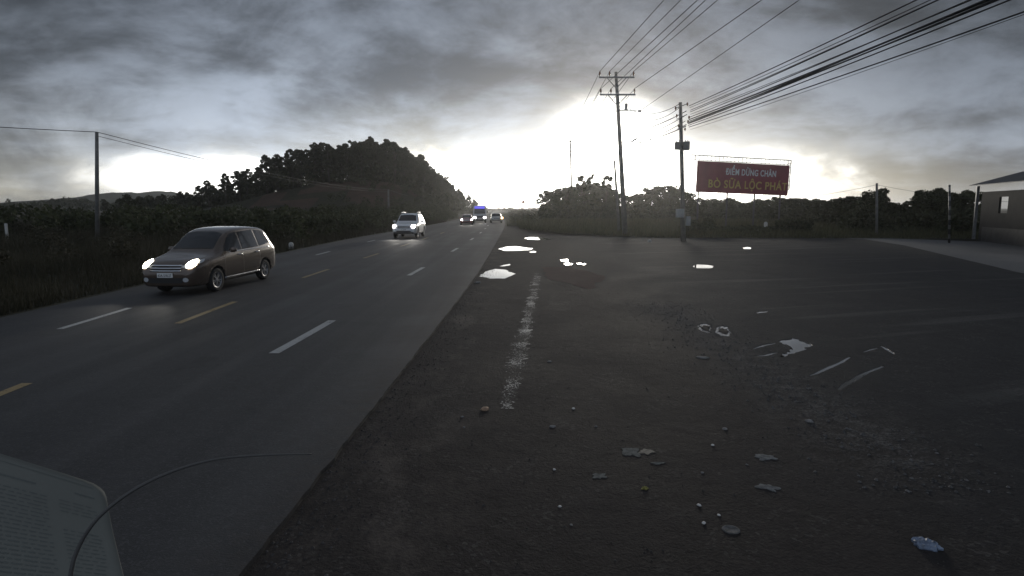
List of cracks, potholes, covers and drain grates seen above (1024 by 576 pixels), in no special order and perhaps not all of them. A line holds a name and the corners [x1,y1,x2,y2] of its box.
pothole [715,326,731,336]
pothole [480,269,516,279]
pothole [777,338,812,357]
